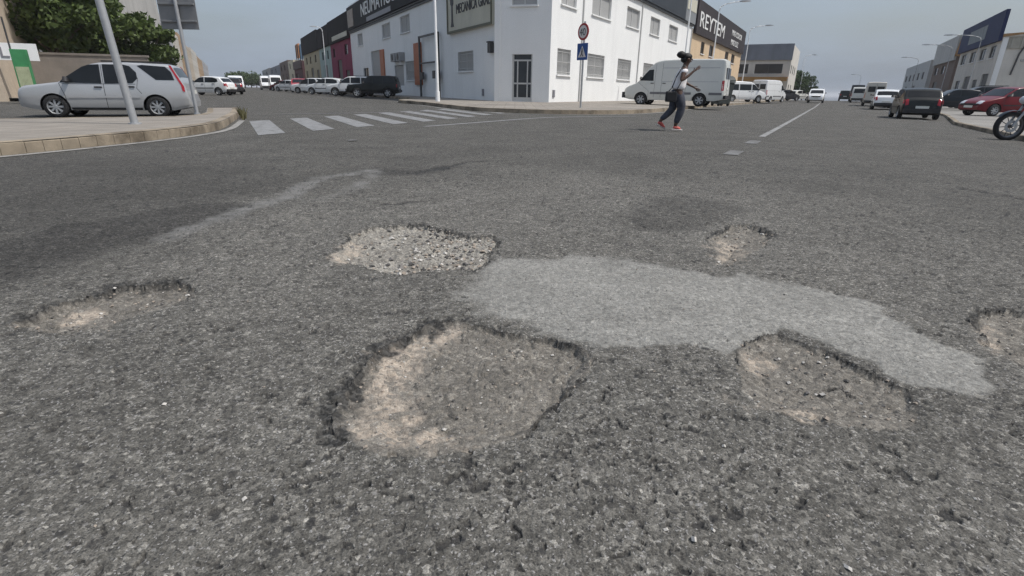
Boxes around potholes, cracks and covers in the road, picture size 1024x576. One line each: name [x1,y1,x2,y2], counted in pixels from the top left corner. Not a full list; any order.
pothole [735,333,919,432]
pothole [707,224,773,265]
pothole [329,224,498,275]
pothole [331,320,596,458]
pothole [969,308,1024,367]
pothole [6,281,195,335]
